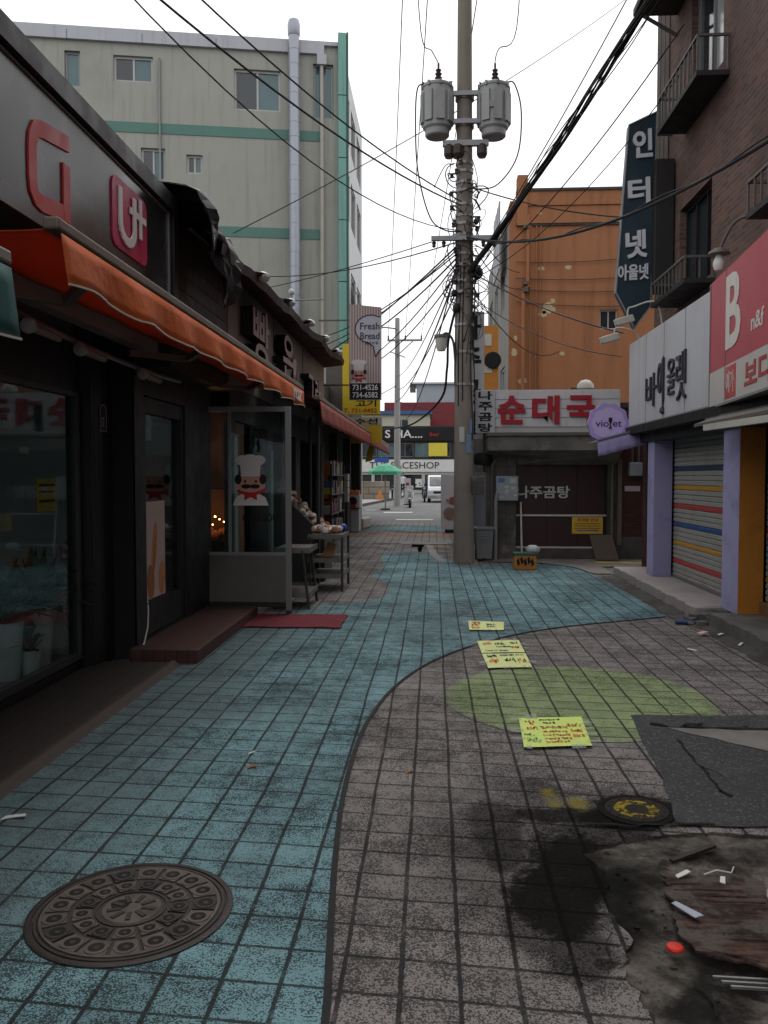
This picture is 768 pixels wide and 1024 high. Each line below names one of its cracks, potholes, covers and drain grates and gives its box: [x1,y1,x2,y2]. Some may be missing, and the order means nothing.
manhole cover [23,863,233,969]
crack [650,722,768,796]
pothole [580,832,768,1024]
manhole cover [597,795,675,827]
